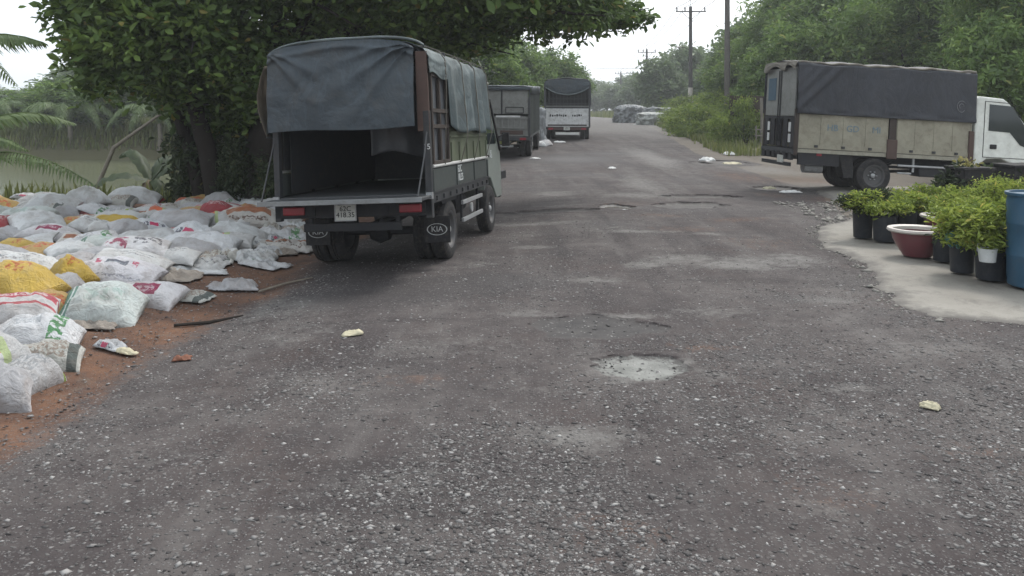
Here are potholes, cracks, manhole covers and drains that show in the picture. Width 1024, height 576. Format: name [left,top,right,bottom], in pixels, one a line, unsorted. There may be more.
pothole [593,203,642,211]
pothole [639,200,744,210]
pothole [574,350,707,386]
